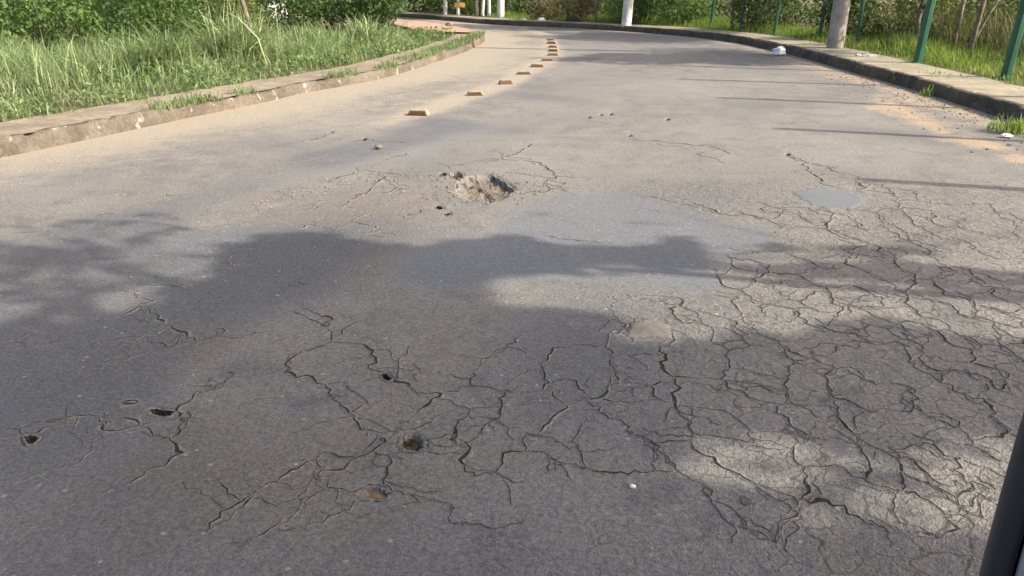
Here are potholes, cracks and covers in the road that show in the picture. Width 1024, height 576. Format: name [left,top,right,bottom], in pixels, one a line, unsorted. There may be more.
pothole [379,371,394,383]
crack [0,152,1024,551]
crack [634,139,730,163]
pothole [453,173,519,205]
pothole [396,433,428,454]
pothole [353,485,395,502]
crack [289,131,591,237]
pothole [21,433,42,446]
pothole [145,407,177,417]
